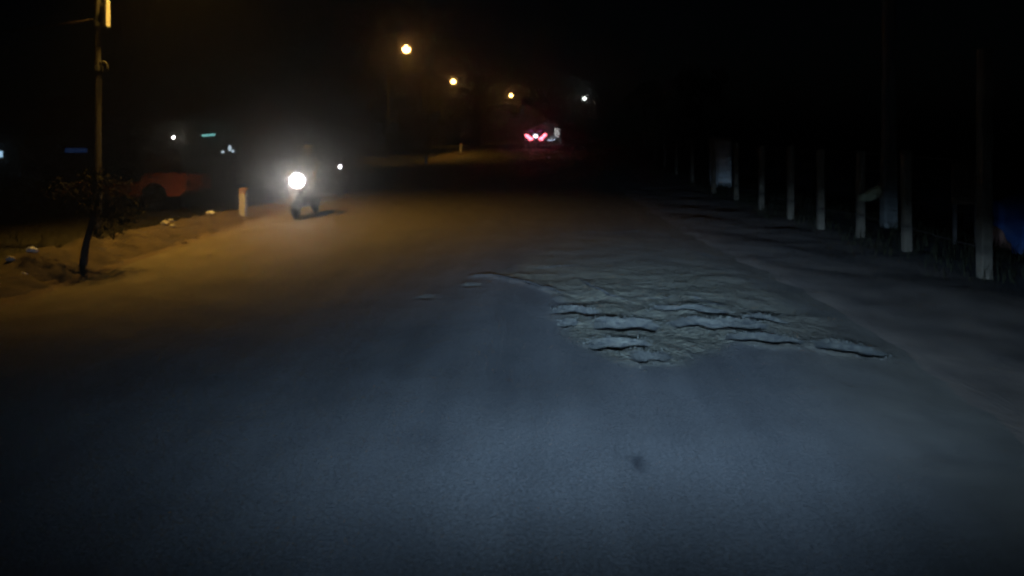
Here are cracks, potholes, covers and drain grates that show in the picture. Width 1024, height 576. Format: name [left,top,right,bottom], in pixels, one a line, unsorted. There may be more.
pothole [559,319,578,328]
pothole [744,313,787,324]
pothole [628,350,673,364]
pothole [723,332,805,345]
pothole [813,340,888,358]
pothole [669,316,770,331]
pothole [587,337,652,351]
pothole [592,317,661,333]
pothole [551,305,601,317]
pothole [651,304,730,315]
